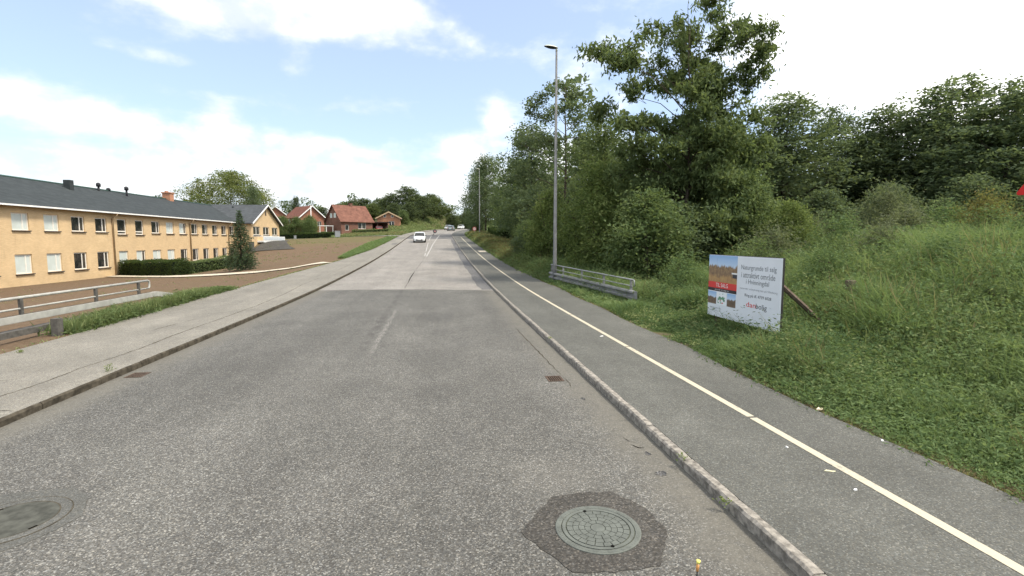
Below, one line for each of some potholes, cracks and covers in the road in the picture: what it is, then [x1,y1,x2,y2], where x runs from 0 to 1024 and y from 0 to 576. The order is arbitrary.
manhole cover [0,496,74,544]
manhole cover [555,506,641,555]
